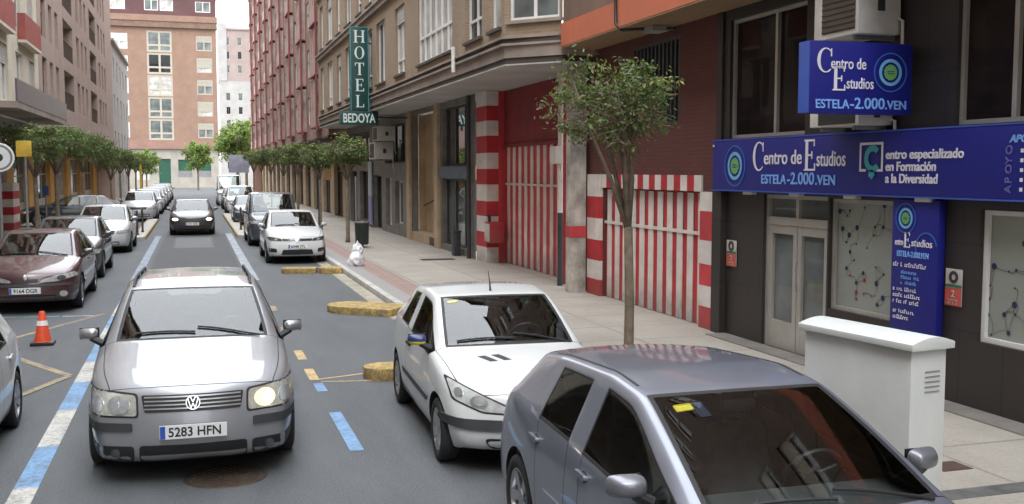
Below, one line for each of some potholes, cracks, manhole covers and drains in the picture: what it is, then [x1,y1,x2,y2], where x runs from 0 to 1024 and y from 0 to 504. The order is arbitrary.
manhole cover [183,464,268,489]
